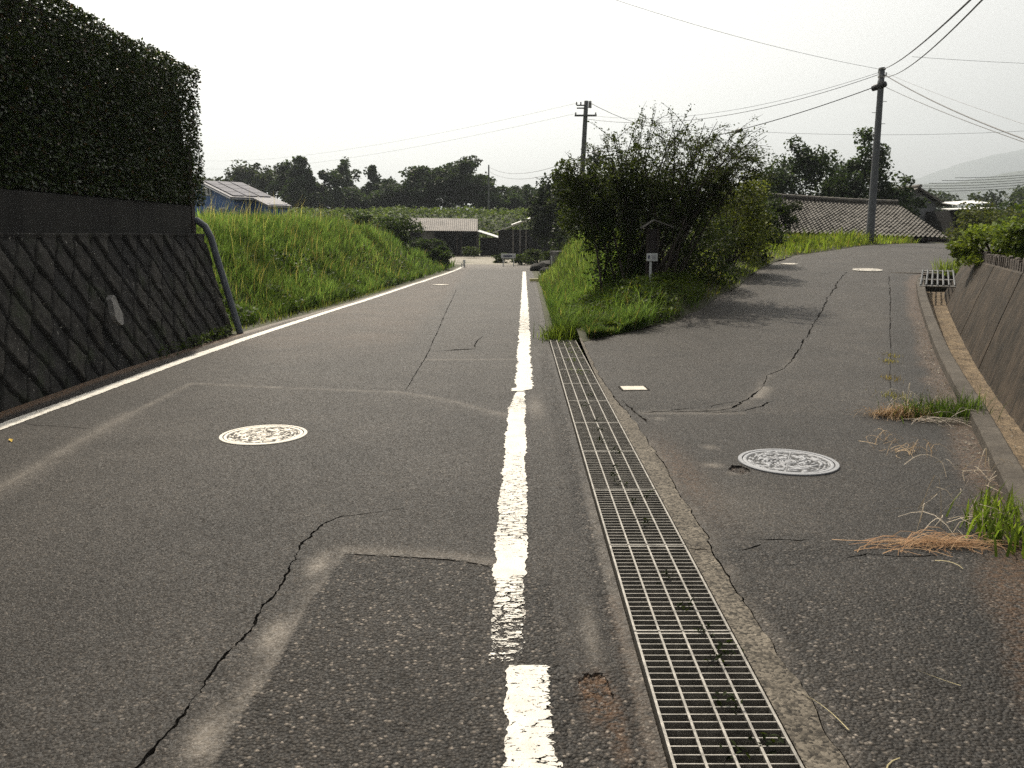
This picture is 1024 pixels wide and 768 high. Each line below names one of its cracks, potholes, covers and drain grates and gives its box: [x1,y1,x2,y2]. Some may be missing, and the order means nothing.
drain grate [567,400,619,427]
manhole cover [738,449,840,476]
drain grate [558,369,598,385]
drain grate [550,339,580,349]
crack [405,291,483,391]
drain grate [634,631,804,768]
drain grate [555,357,591,371]
drain grate [562,383,607,403]
drain grate [574,422,635,456]
pothole [578,673,614,709]
drain grate [609,545,731,641]
pothole [728,465,751,474]
